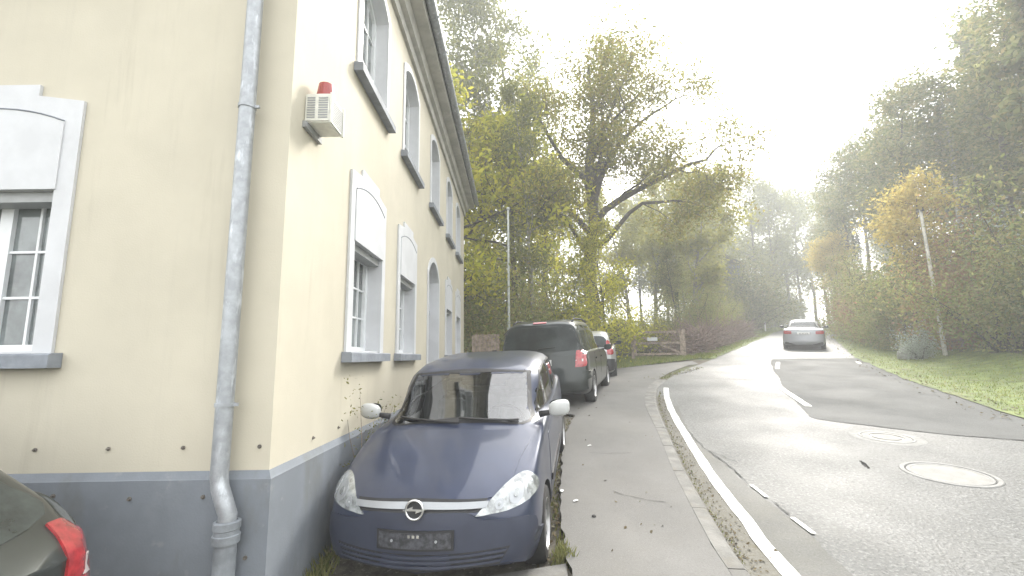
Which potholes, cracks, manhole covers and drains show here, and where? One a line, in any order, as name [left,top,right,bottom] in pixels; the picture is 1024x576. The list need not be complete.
manhole cover [898,461,1005,488]
manhole cover [848,430,928,446]
